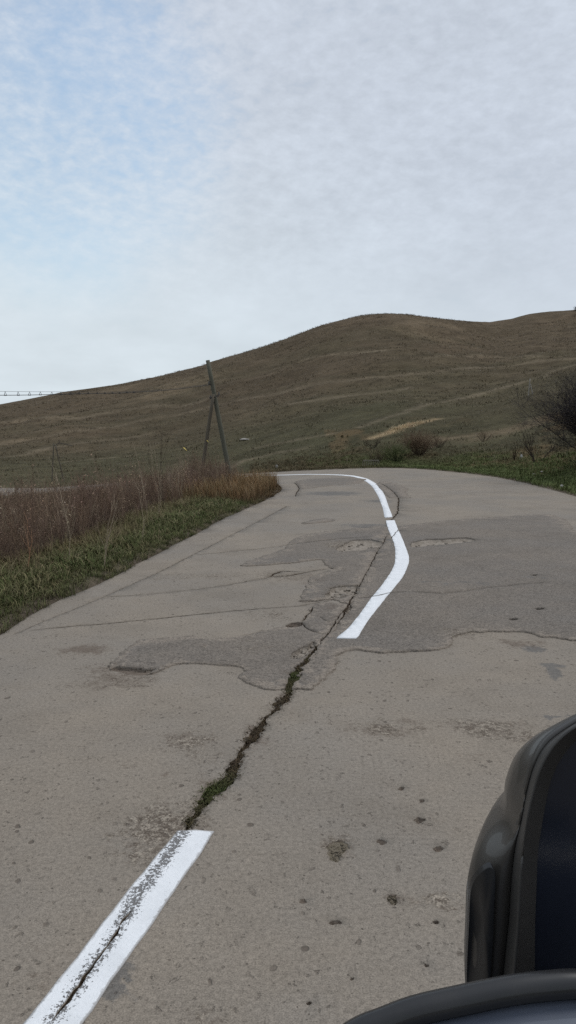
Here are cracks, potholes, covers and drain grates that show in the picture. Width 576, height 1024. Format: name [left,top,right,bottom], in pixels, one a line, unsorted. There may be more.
crack [181,645,317,830]
pothole [326,842,350,862]
crack [52,601,351,629]
crack [56,915,129,1016]
